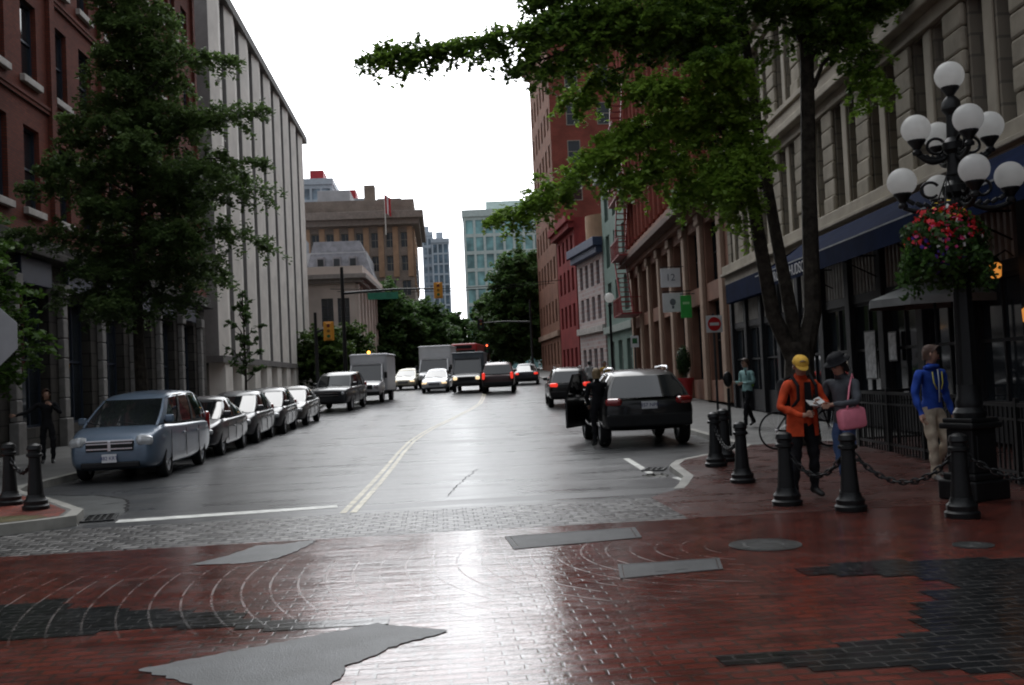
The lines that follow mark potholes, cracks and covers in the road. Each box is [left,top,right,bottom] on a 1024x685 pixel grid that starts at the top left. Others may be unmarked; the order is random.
manhole cover [952,541,995,549]
manhole cover [729,538,802,551]
drain grate [79,513,119,523]
